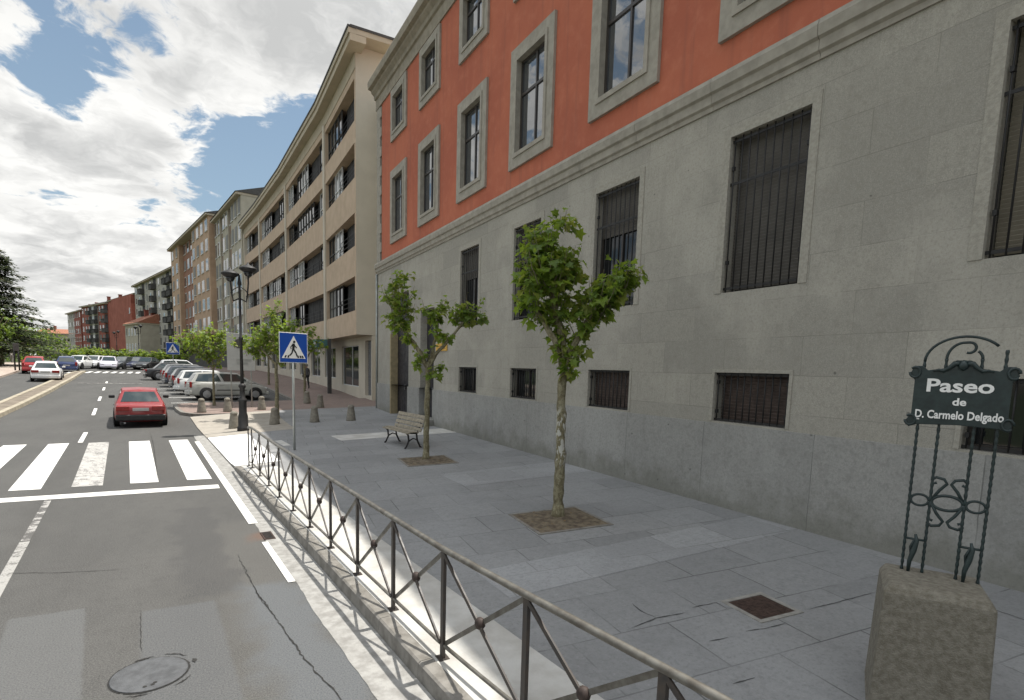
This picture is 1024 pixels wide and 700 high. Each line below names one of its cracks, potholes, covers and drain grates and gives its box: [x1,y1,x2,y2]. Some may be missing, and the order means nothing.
crack [632,602,727,627]
manhole cover [107,653,197,697]
crack [237,554,342,700]
utility cover [721,592,804,623]
